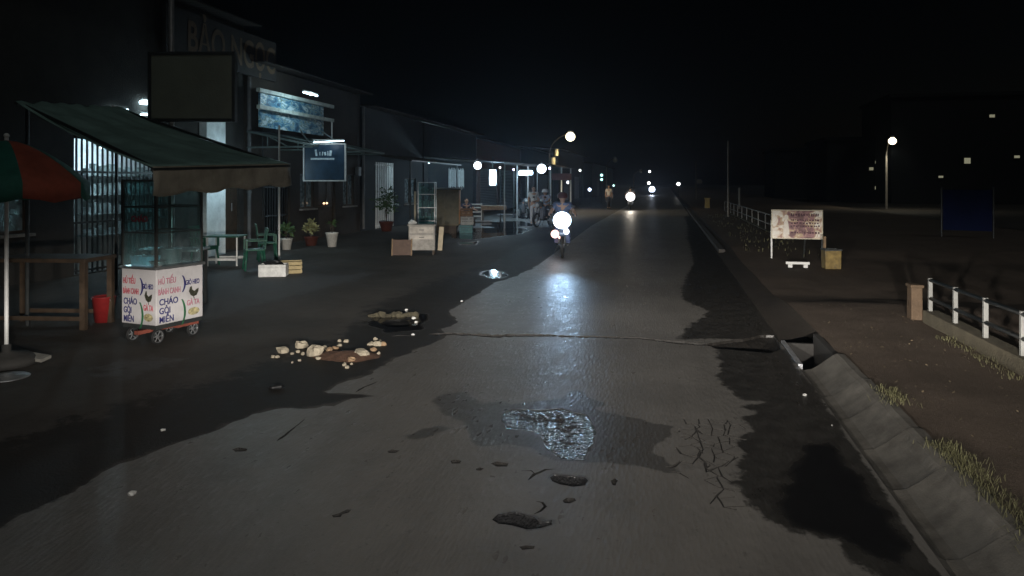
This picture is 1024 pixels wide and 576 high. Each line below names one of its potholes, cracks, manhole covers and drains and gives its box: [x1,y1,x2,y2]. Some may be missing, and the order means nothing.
crack [666,418,747,510]
pothole [550,474,588,487]
pothole [501,408,596,460]
pothole [492,511,552,529]
drain grate [781,334,839,370]
